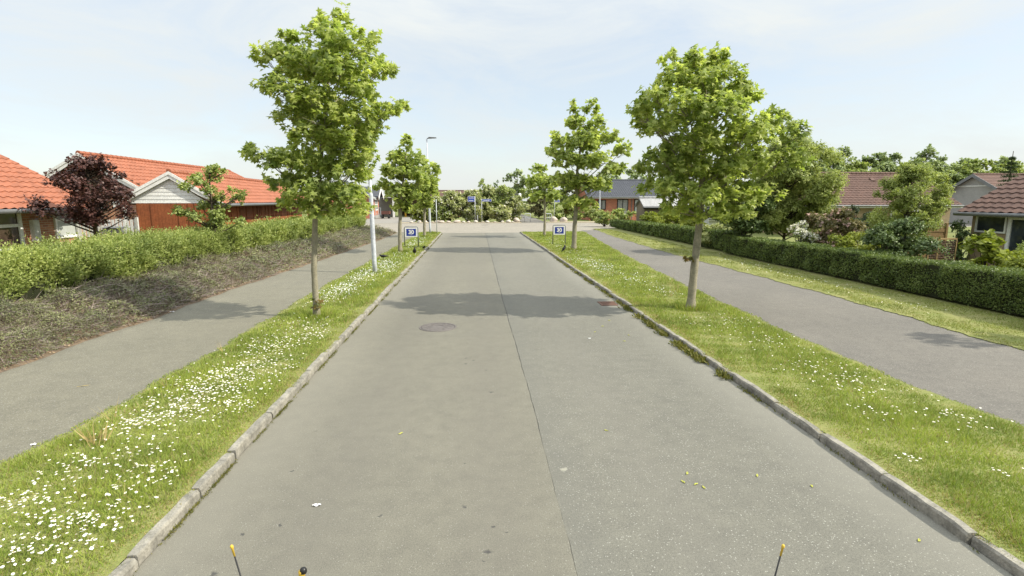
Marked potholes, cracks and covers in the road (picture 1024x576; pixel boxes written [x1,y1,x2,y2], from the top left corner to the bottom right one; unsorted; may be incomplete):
manhole cover [419,323,457,332]
